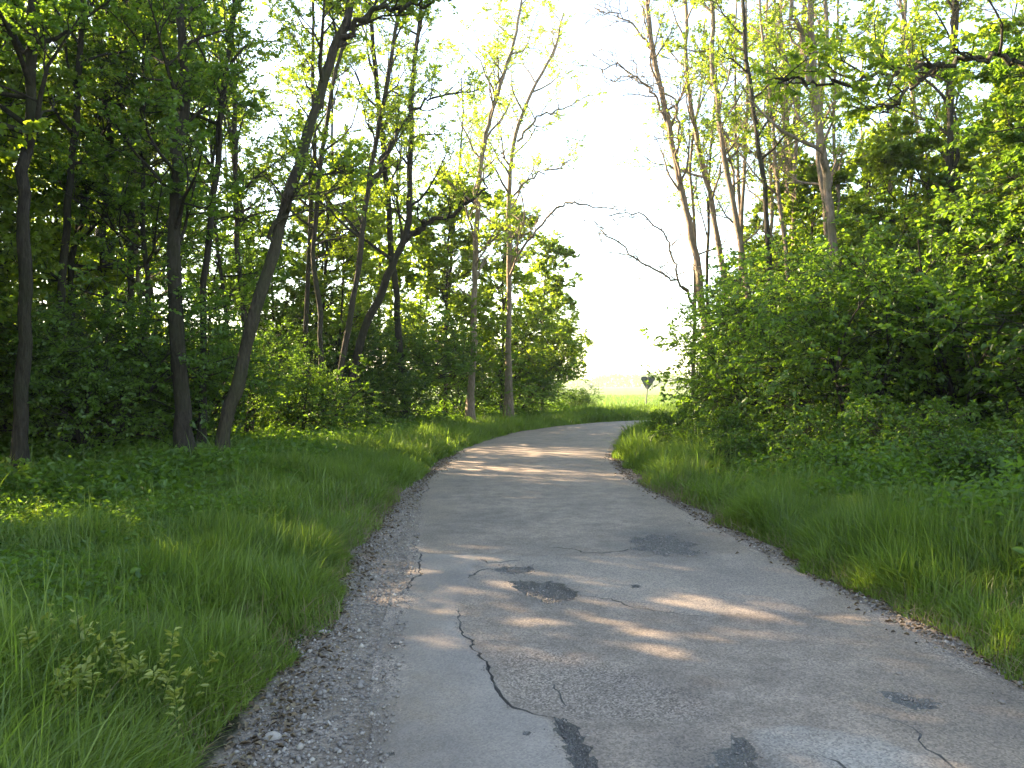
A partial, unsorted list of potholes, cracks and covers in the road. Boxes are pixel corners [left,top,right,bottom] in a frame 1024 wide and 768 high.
pothole [510,580,579,604]
crack [457,608,566,717]
crack [406,553,423,589]
pothole [705,734,759,768]
crack [581,595,705,617]
crack [865,712,955,768]
pothole [553,717,599,768]
